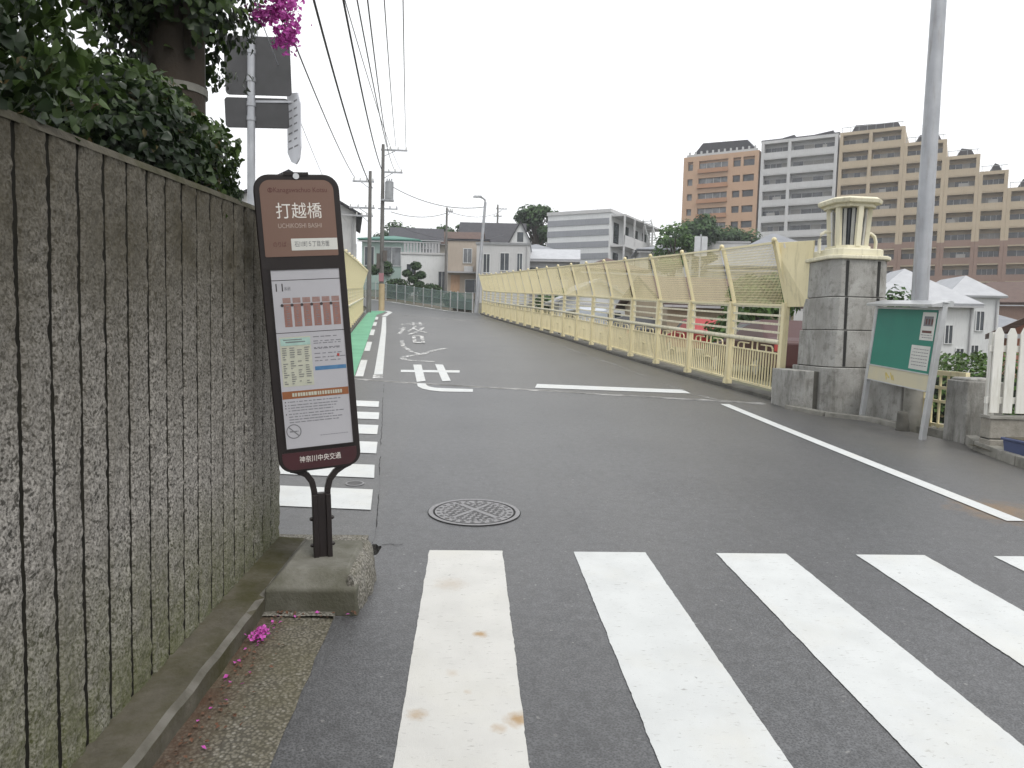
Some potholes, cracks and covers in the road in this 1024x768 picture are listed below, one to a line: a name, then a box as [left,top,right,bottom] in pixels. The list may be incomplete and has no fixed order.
manhole cover [428,499,521,526]
